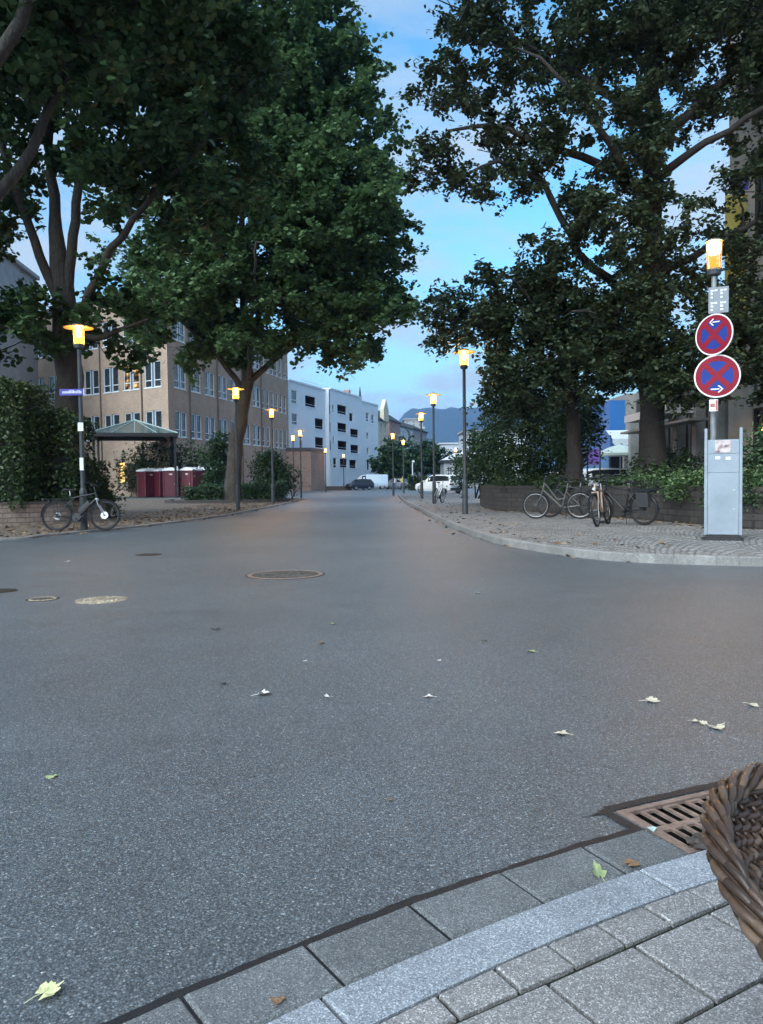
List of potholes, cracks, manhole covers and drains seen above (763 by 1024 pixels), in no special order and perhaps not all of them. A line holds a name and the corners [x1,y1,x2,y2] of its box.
manhole cover [74,596,128,604]
manhole cover [245,570,325,580]
drain grate [616,790,709,854]
